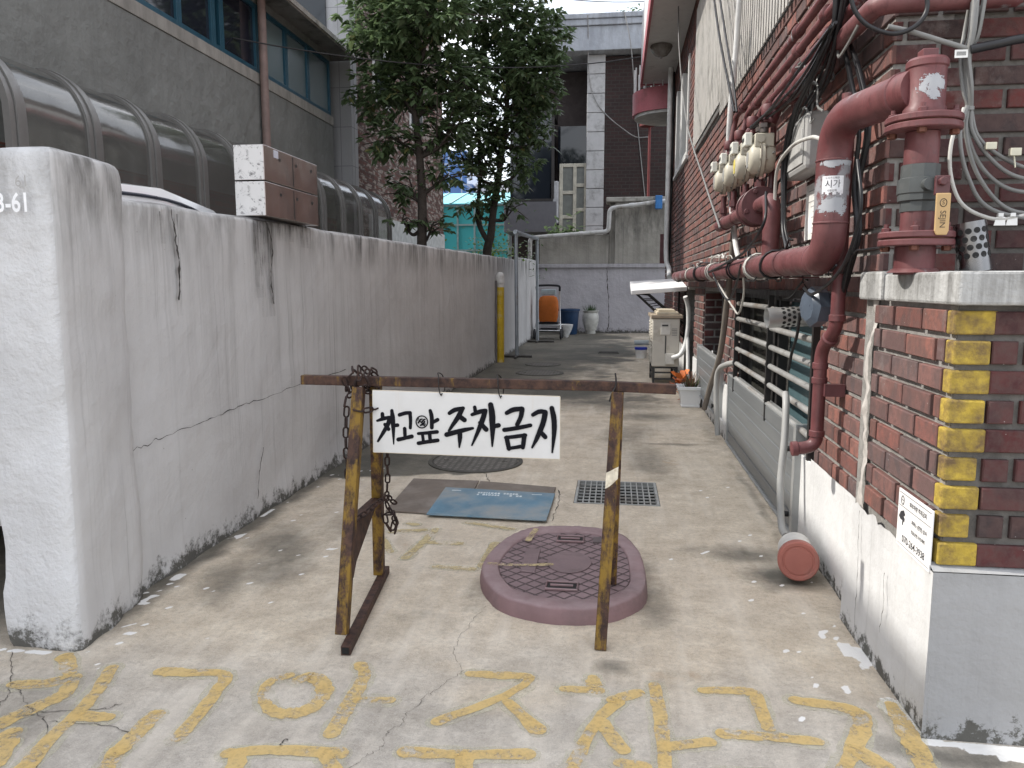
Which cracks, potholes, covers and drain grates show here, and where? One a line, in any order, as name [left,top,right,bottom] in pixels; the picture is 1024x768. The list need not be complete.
manhole cover [480,526,648,626]
drain grate [573,480,660,506]
crack [349,606,486,768]
manhole cover [428,455,523,473]
